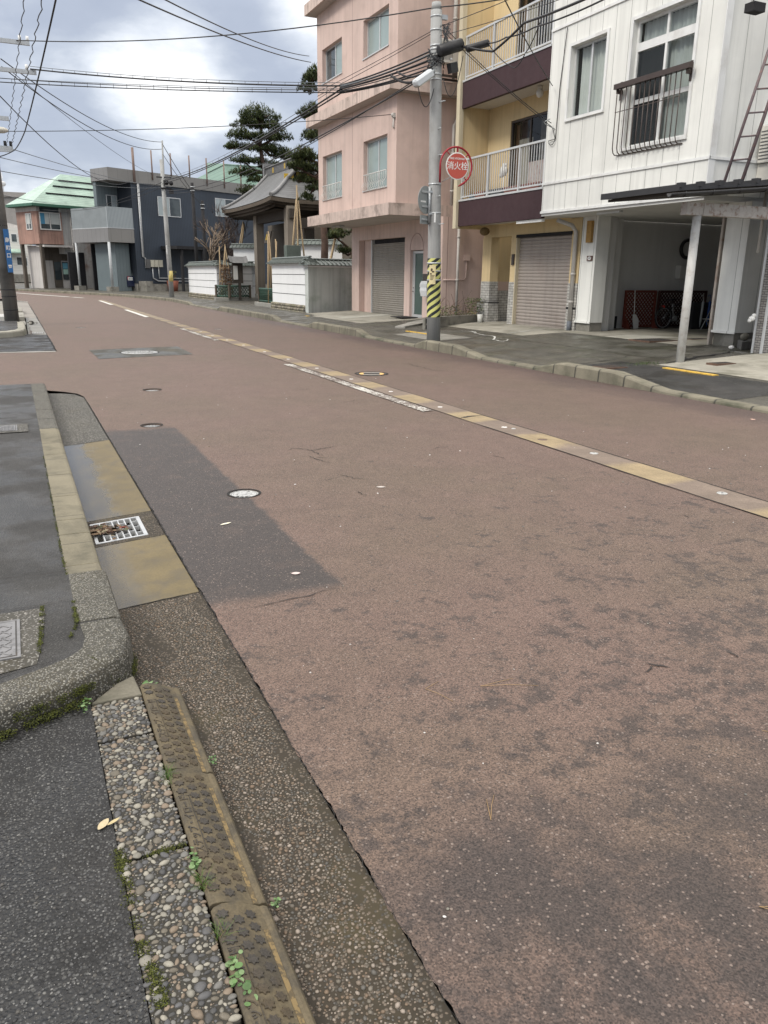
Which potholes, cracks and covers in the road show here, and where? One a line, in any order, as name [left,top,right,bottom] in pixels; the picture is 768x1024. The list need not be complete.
manhole cover [227,489,261,498]
manhole cover [0,619,21,661]
drain grate [90,516,148,548]
